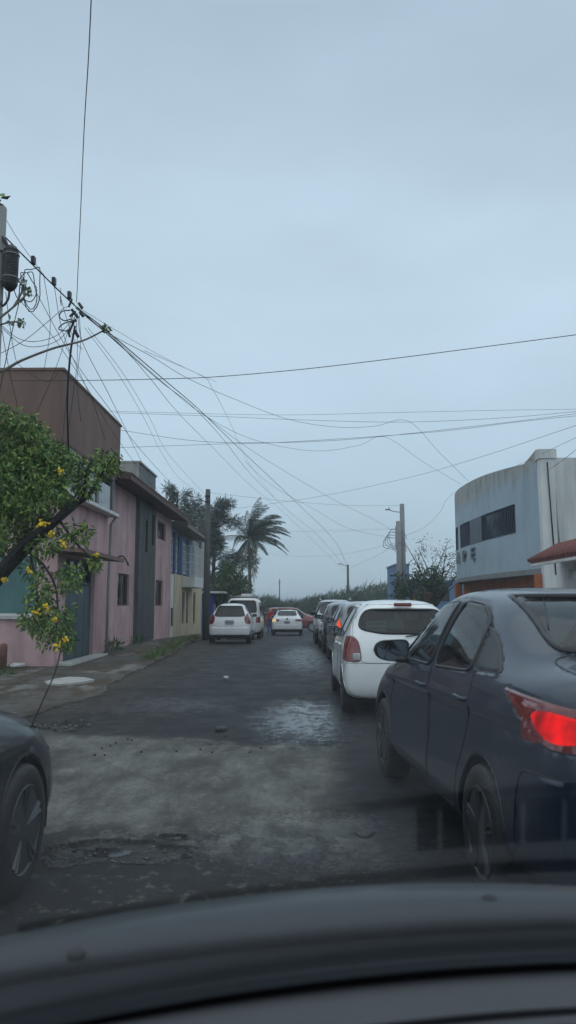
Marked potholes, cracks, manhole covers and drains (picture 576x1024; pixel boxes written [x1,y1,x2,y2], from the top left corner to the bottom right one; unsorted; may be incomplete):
pothole [34,722,90,732]
pothole [158,833,189,841]
pothole [38,838,198,868]
